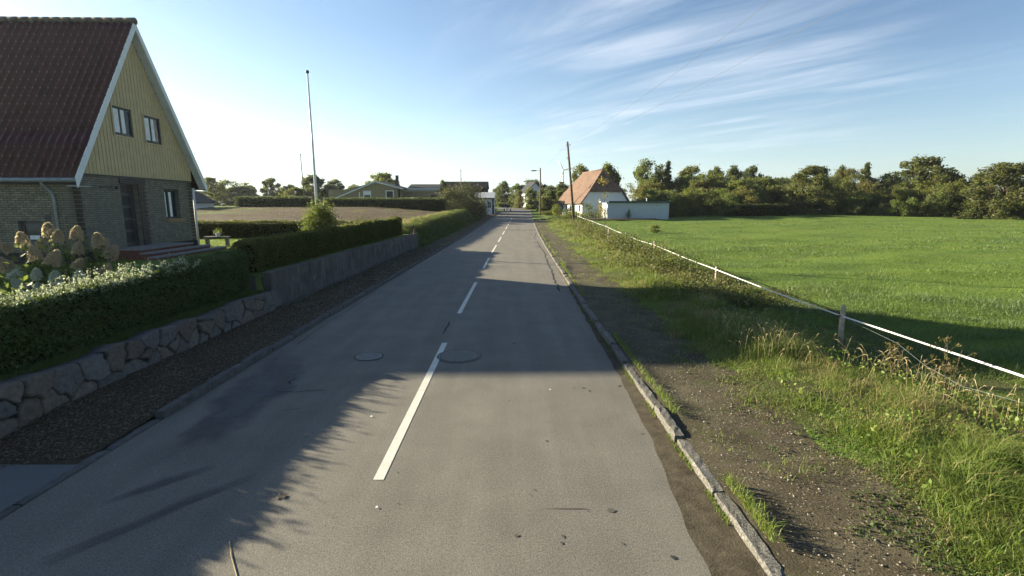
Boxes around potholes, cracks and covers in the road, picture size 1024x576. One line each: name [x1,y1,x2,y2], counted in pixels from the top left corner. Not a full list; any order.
manhole cover [354,352,384,361]
manhole cover [437,349,481,363]
crack [534,236,560,291]
